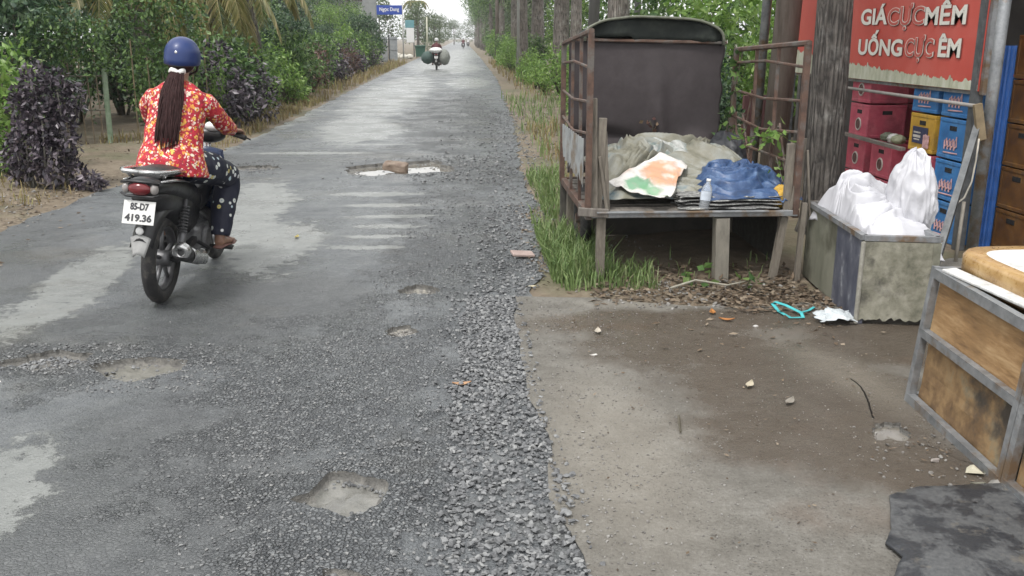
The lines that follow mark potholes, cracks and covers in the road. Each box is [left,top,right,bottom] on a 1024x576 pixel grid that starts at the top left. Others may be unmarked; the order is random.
pothole [290,471,389,517]
pothole [89,357,188,382]
pothole [398,285,440,294]
pothole [872,422,911,441]
pothole [386,325,419,337]
pothole [345,160,454,176]
